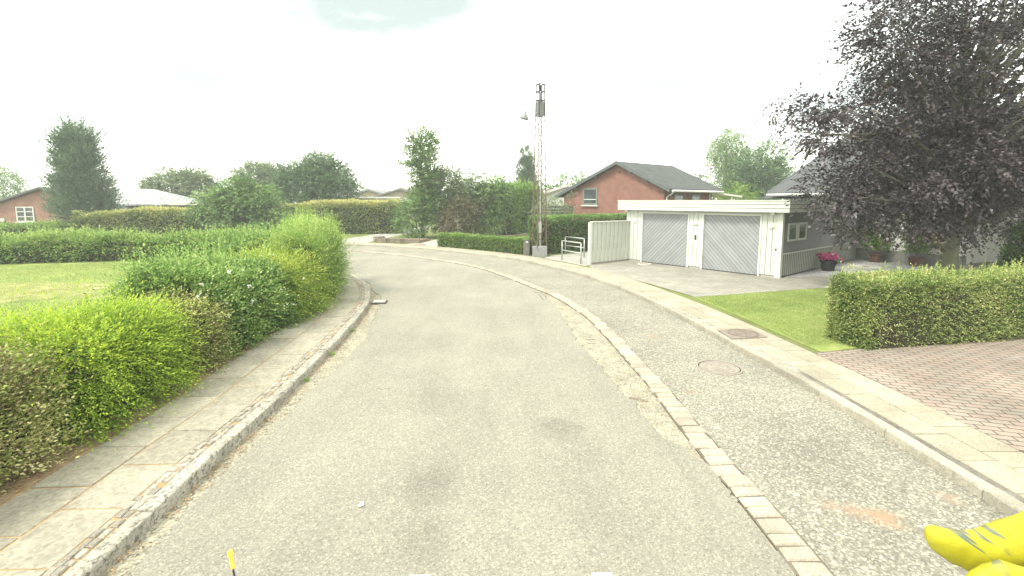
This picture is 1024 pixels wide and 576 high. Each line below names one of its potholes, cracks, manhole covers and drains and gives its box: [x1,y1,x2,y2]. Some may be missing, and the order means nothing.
manhole cover [718,328,767,340]
manhole cover [696,360,743,375]
